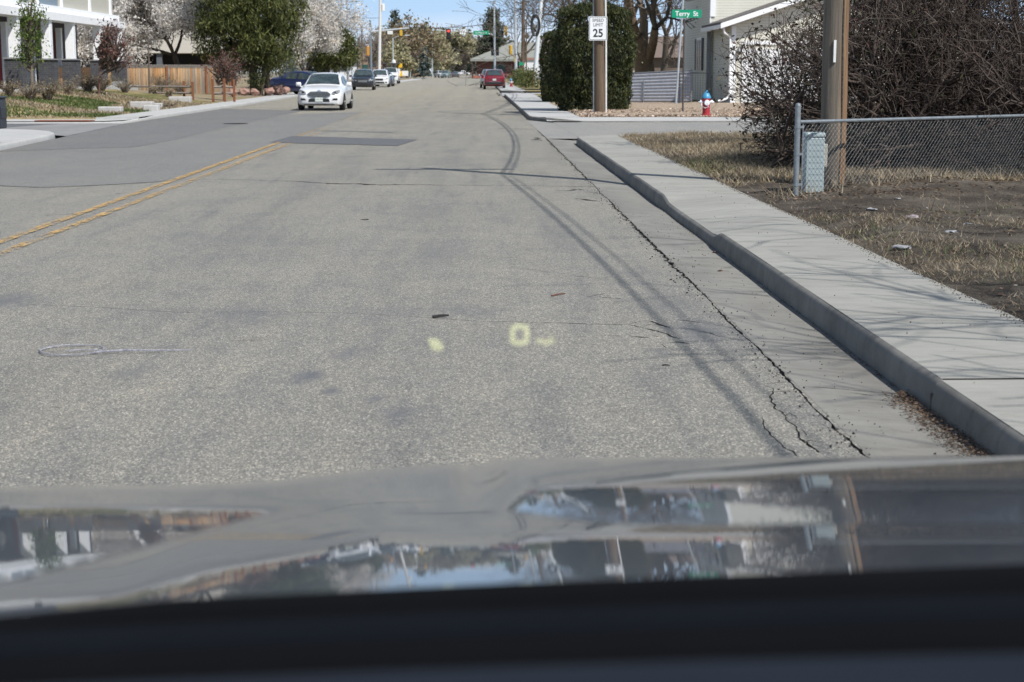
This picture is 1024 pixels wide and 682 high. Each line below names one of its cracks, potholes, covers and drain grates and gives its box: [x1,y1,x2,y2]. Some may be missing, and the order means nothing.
crack [762,382,893,457]
